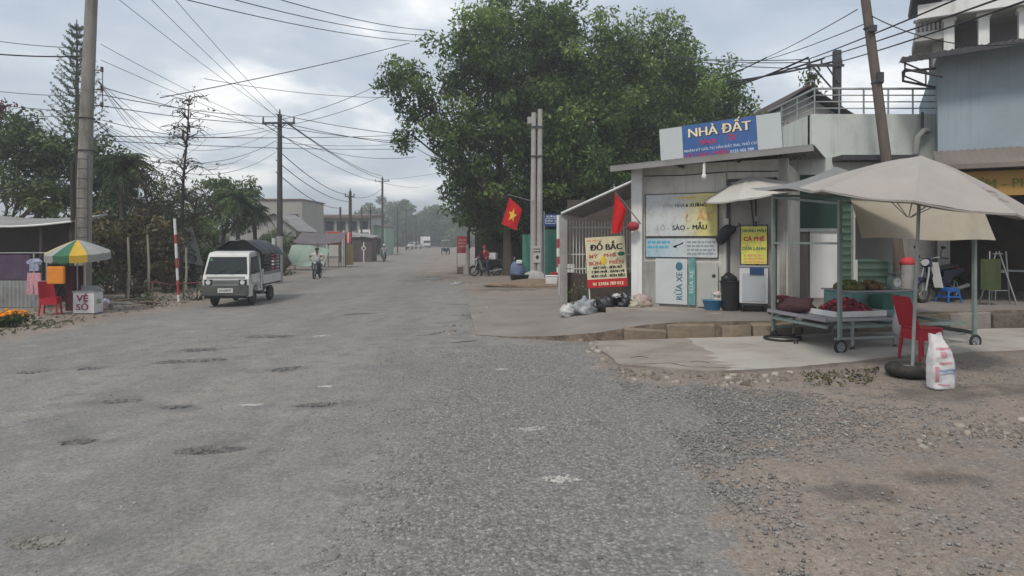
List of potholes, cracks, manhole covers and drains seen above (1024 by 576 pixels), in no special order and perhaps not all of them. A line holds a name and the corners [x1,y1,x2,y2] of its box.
pothole [57,438,100,446]
pothole [173,445,253,456]
